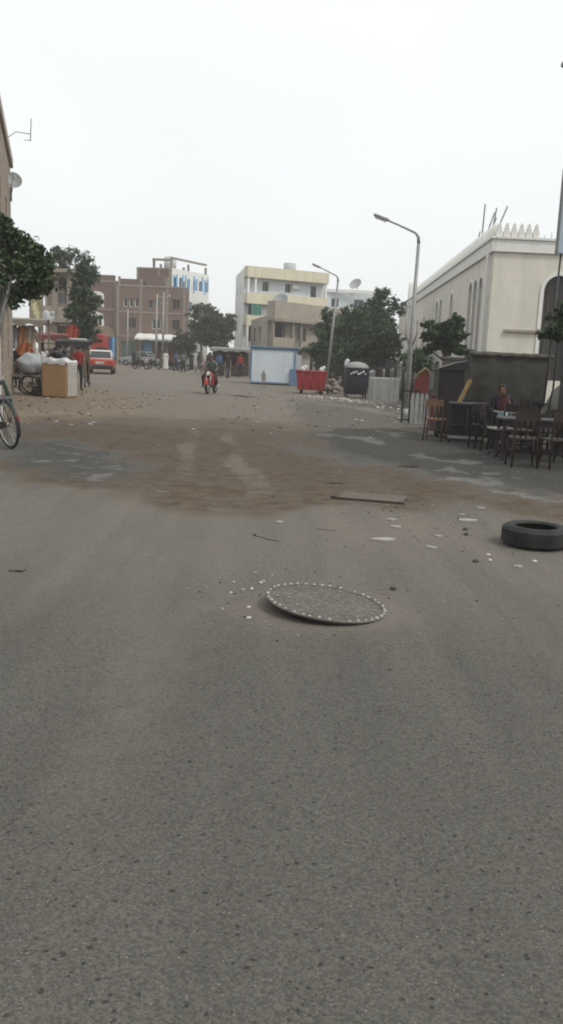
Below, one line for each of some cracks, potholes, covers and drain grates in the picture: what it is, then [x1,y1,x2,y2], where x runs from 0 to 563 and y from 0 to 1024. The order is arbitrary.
manhole cover [265,582,387,625]
